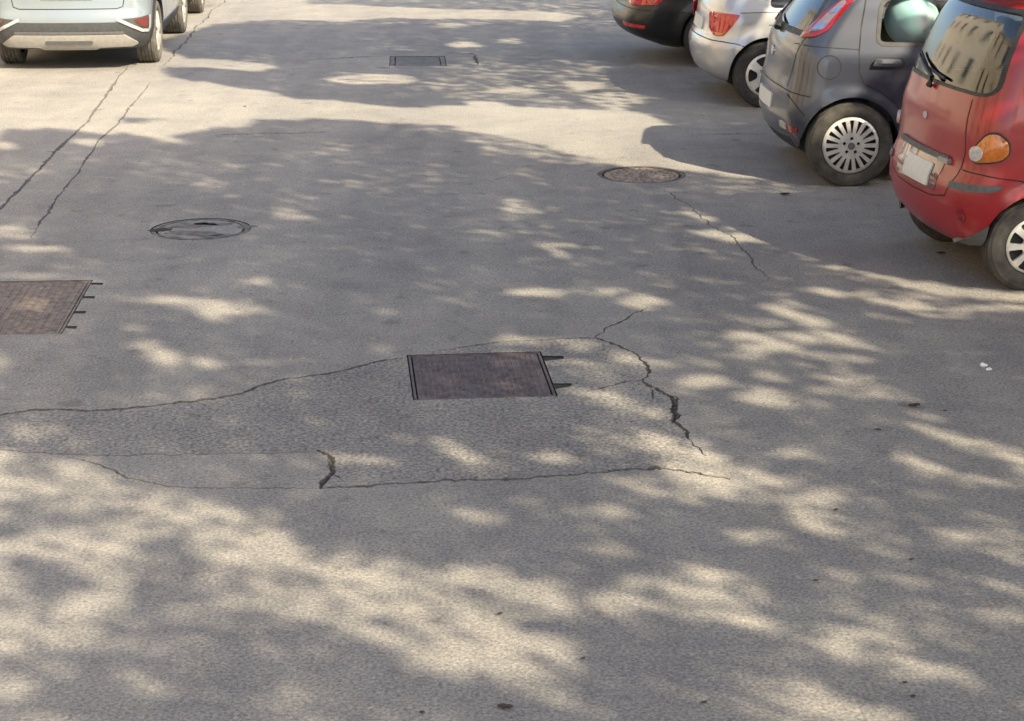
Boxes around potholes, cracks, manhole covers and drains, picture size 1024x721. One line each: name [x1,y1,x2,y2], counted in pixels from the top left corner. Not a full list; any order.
crack [660,188,770,279]
manhole cover [0,280,103,335]
manhole cover [598,166,685,183]
crack [0,1,225,238]
manhole cover [408,352,572,400]
manhole cover [148,219,258,240]
crack [1,307,730,489]
manhole cover [389,56,446,66]
